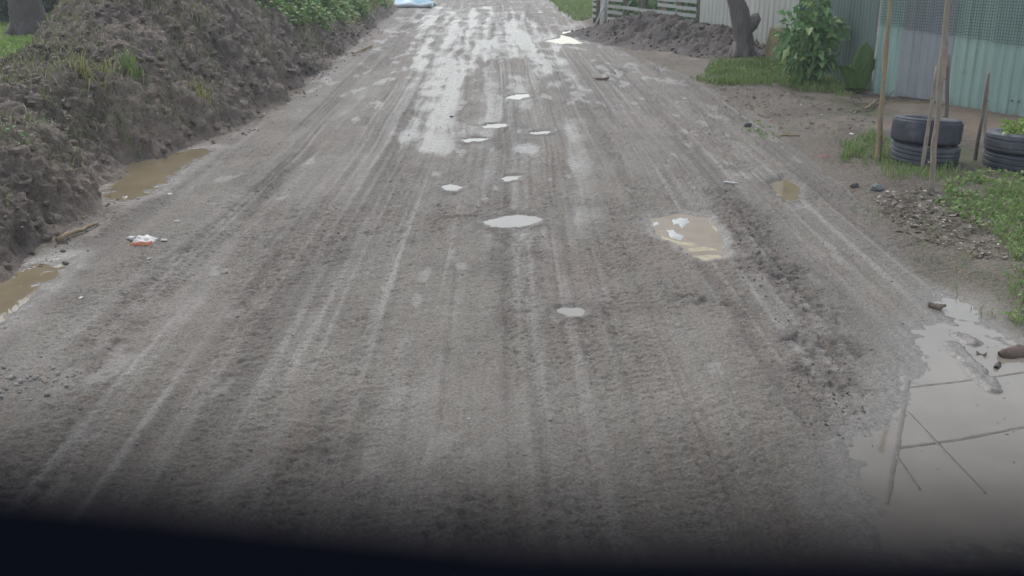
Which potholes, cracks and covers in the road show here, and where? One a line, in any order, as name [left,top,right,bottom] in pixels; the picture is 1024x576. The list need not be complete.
pothole [480,212,547,228]
pothole [554,305,587,317]
pothole [767,176,806,202]
pothole [647,212,731,261]
pothole [440,183,466,191]
